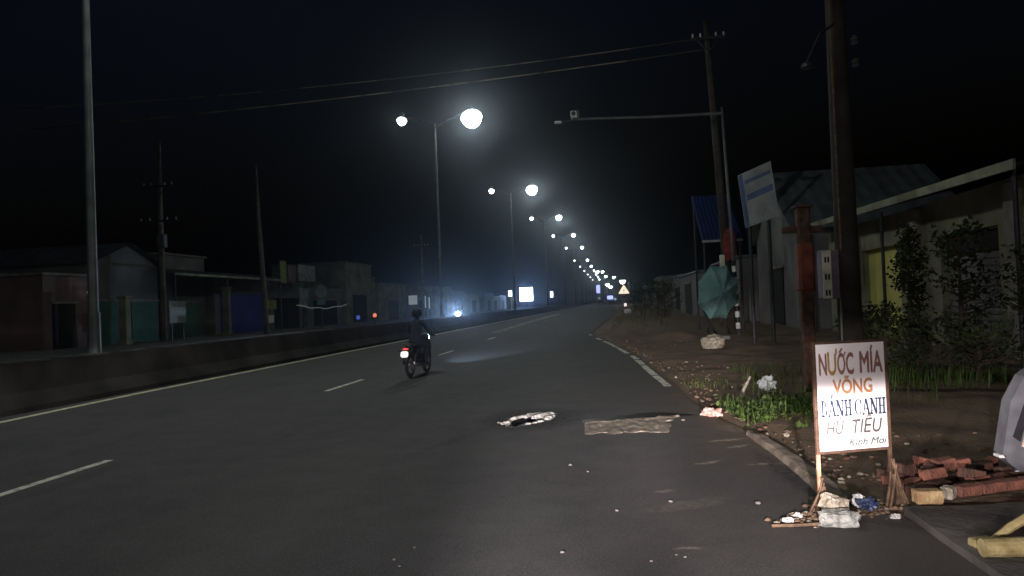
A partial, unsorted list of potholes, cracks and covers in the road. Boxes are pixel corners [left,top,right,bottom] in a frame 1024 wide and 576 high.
pothole [497,411,558,427]
